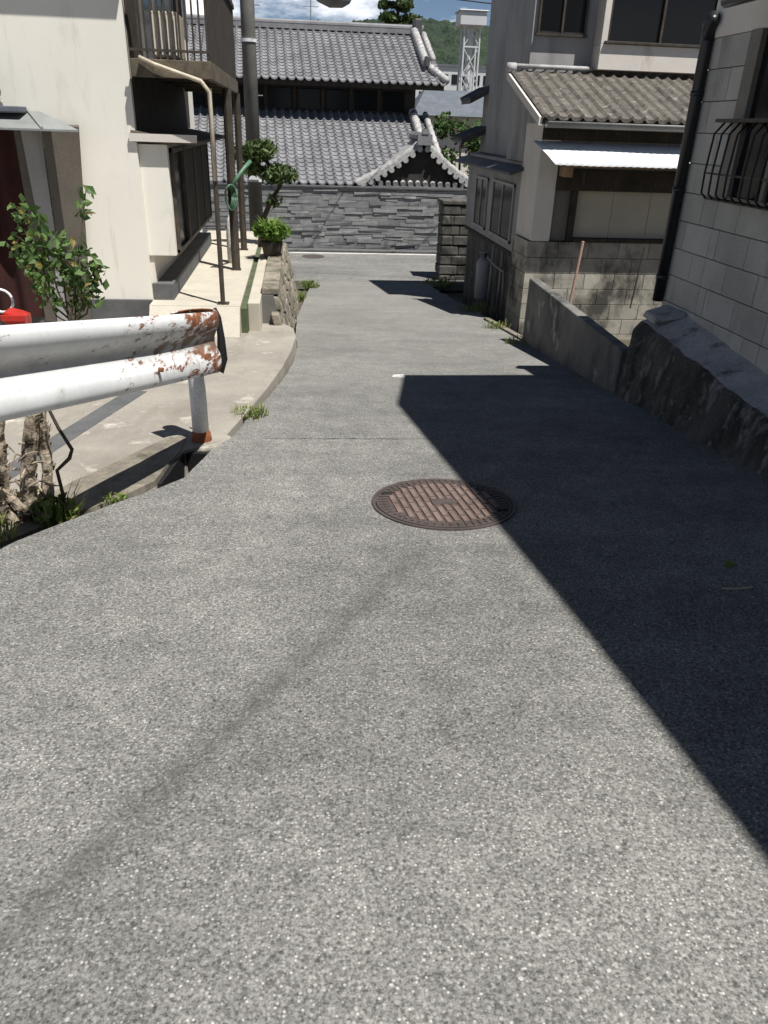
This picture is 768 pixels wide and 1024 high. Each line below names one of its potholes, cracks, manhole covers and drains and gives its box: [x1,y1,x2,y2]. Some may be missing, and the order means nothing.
manhole cover [372,479,516,531]
